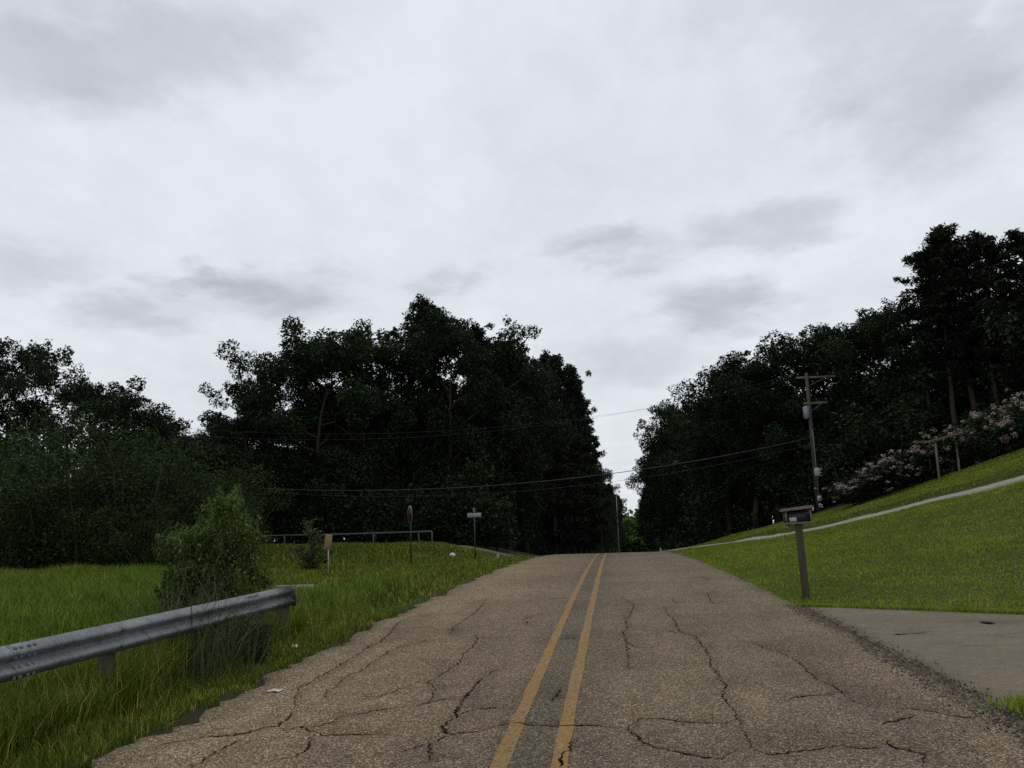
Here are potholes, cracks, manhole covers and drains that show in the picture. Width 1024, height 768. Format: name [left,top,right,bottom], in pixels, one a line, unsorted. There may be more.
crack [401,603,611,766]
crack [159,619,410,767]
crack [627,611,936,764]
crack [883,708,998,724]
